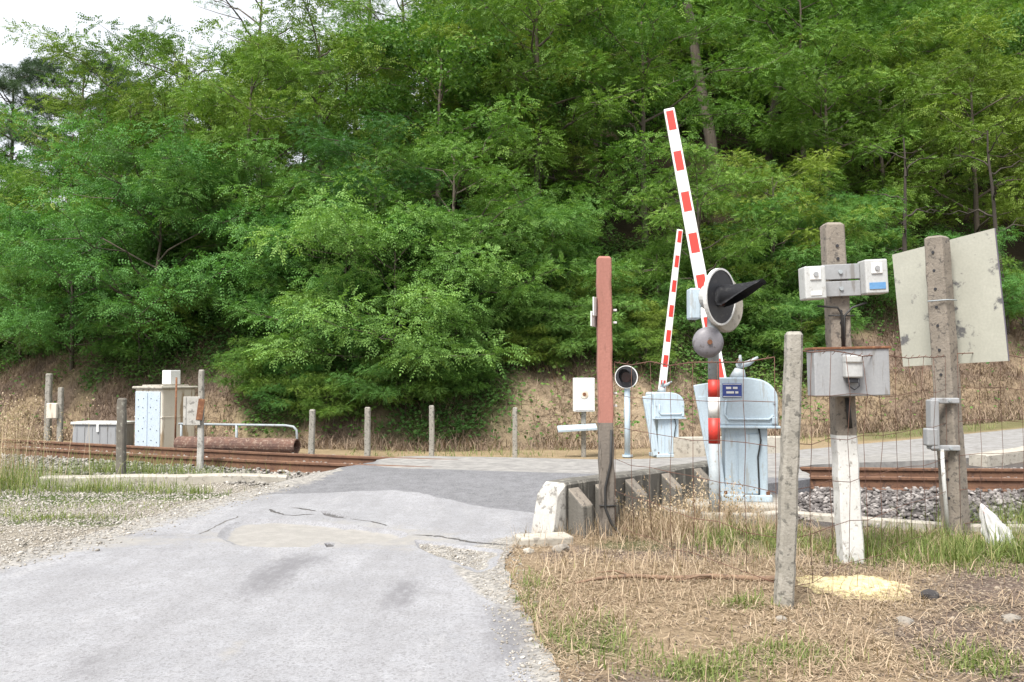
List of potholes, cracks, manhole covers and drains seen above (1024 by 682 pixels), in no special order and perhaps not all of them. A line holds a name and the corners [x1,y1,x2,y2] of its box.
crack [422,535,507,545]
crack [269,508,316,516]
